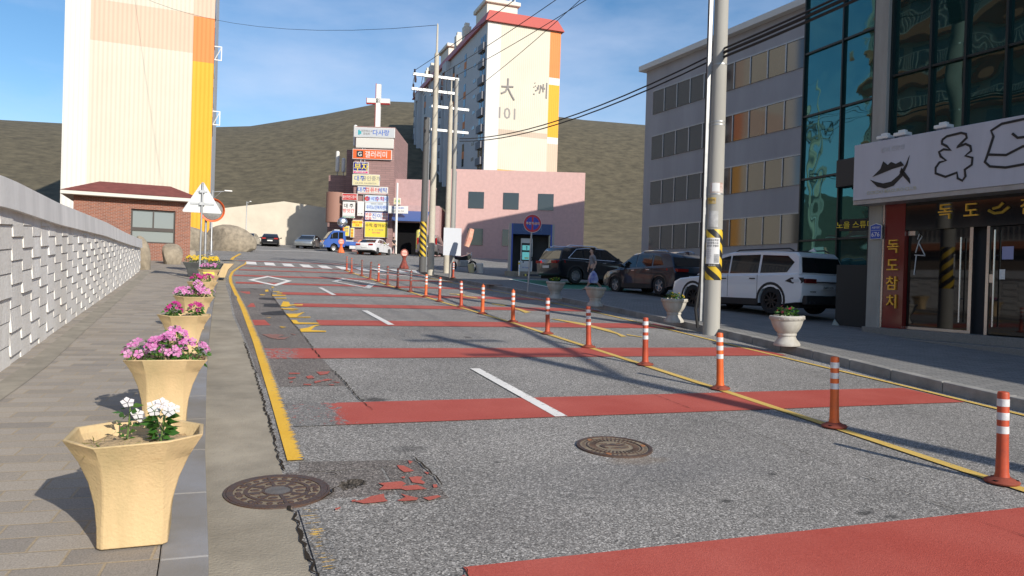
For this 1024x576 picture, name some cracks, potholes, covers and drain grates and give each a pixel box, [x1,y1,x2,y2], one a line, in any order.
crack [413,456,442,484]
manhole cover [577,436,653,458]
manhole cover [223,474,330,510]
